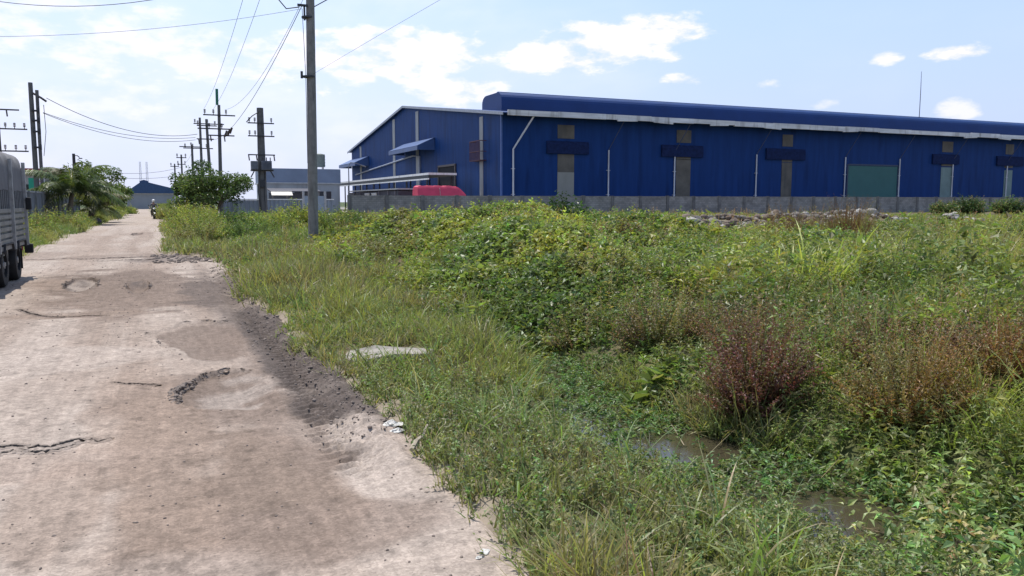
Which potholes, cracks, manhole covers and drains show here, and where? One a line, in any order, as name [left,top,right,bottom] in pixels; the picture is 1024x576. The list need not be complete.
crack [15,309,110,318]
pothole [169,367,291,417]
pothole [60,277,101,293]
pothole [124,278,153,295]
crack [0,437,112,457]
